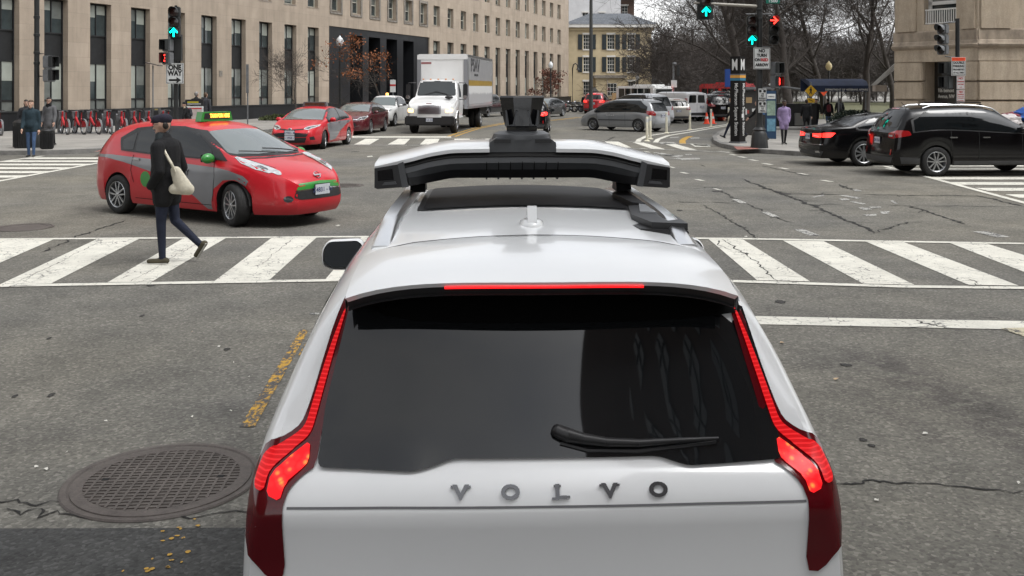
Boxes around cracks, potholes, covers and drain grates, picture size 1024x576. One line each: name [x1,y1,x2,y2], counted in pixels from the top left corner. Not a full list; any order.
crack [837,479,1024,493]
crack [0,499,97,518]
crack [717,240,796,281]
manhole cover [0,223,54,232]
manhole cover [57,443,258,523]
crack [683,166,1021,233]
crack [43,220,136,252]
